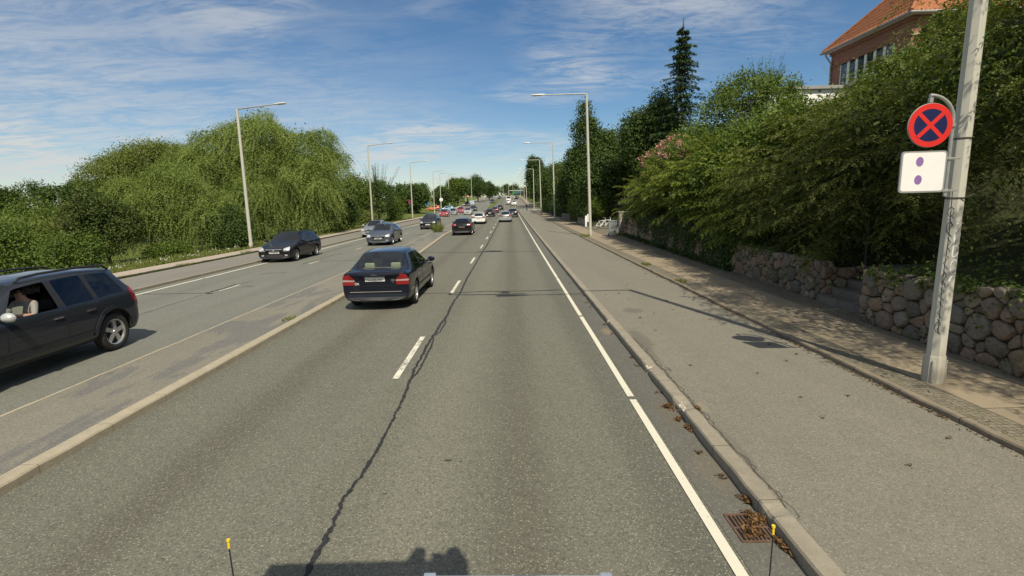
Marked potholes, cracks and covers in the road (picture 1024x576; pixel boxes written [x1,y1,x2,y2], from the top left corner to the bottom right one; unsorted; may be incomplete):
drain grate [723,513,777,543]
